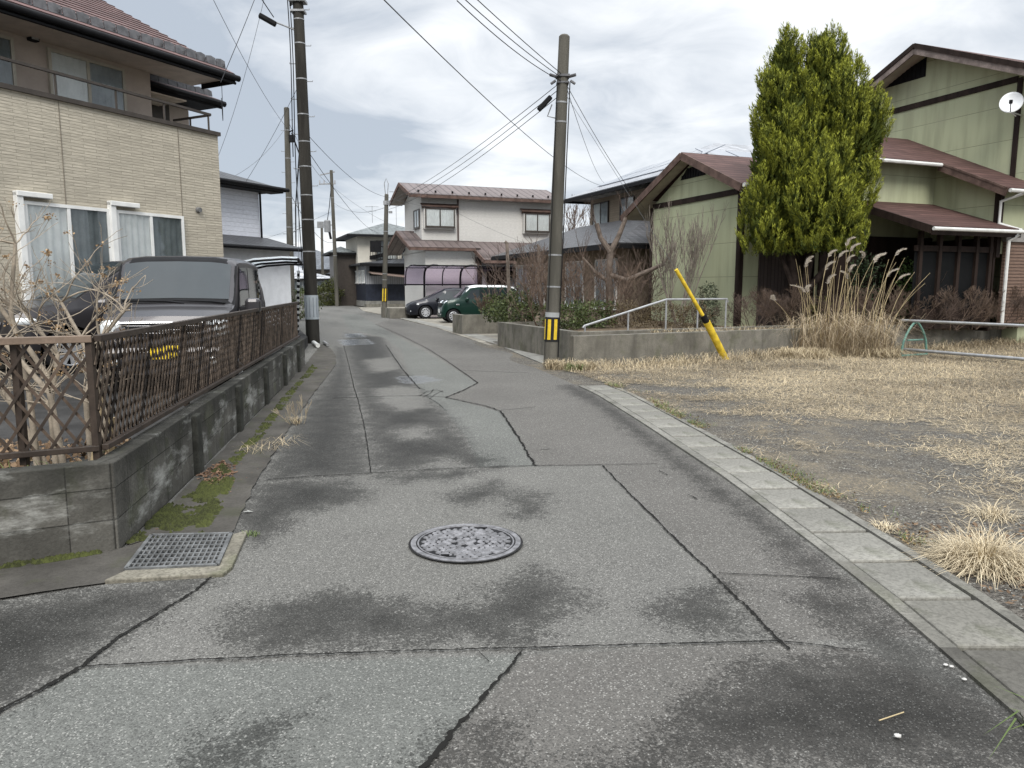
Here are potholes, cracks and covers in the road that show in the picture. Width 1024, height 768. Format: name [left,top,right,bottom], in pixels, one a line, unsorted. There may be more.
drain grate [105,530,248,584]
manhole cover [408,524,523,563]
crack [0,577,863,712]
